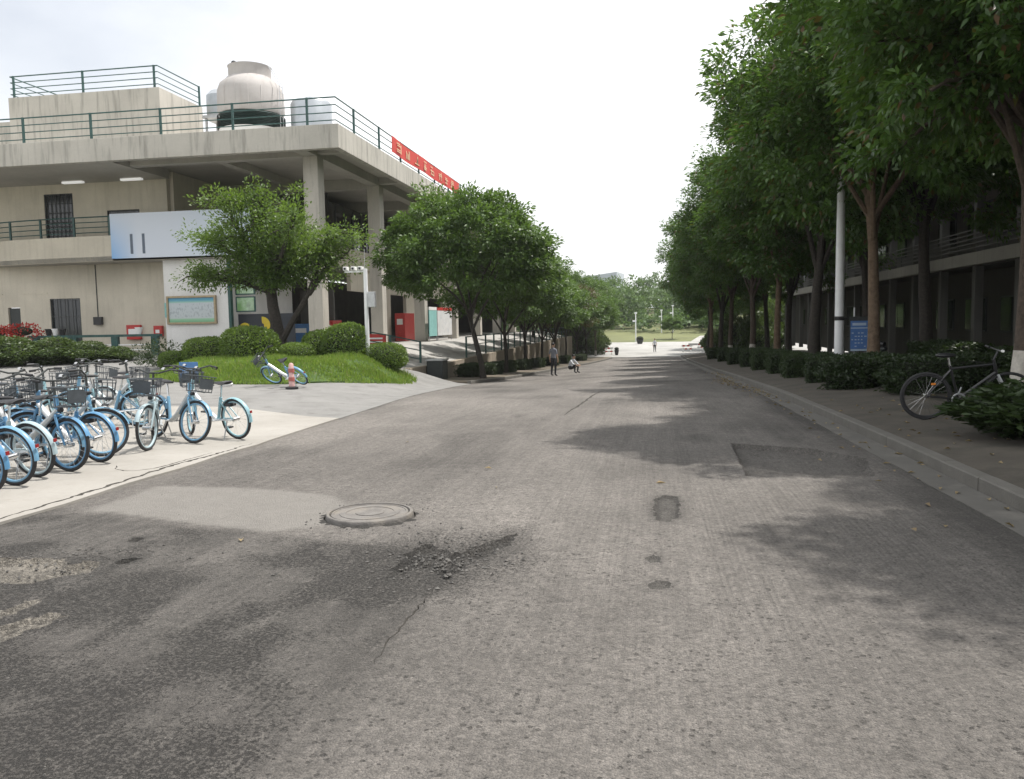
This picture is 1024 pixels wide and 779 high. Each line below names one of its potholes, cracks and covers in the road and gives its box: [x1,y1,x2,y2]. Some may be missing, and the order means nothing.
manhole cover [319,502,419,529]
crack [374,587,434,661]
pothole [385,533,518,582]
pothole [652,495,681,522]
pothole [648,580,671,590]
